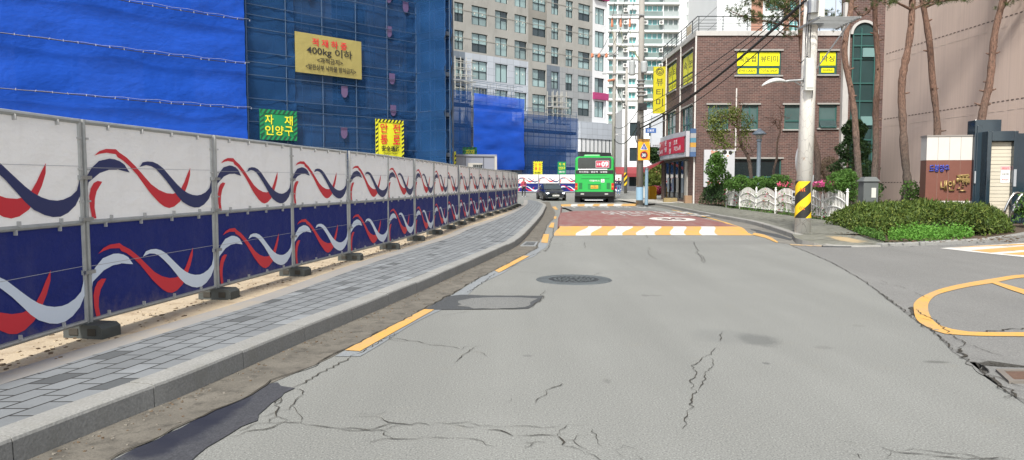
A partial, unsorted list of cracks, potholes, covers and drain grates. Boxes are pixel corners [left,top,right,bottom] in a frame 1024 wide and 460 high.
crack [881,282,1023,399]
crack [229,228,639,460]
crack [682,333,722,429]
manhole cover [536,274,612,285]
